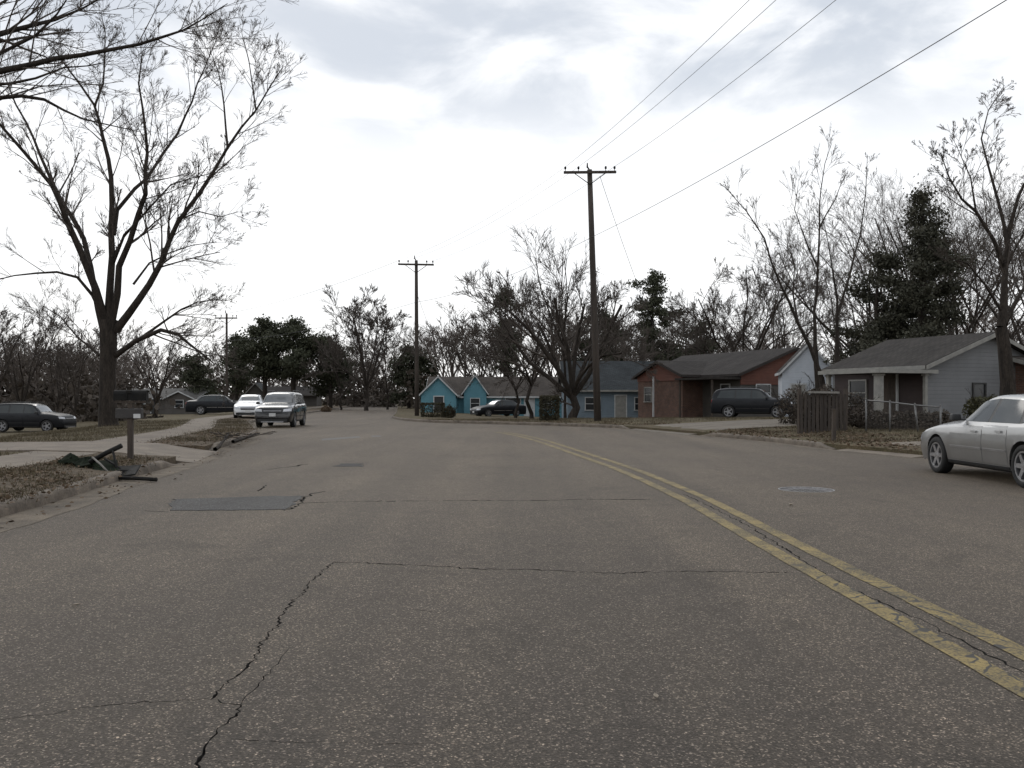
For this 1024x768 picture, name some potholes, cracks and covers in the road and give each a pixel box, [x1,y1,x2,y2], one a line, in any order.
crack [1,562,787,768]
